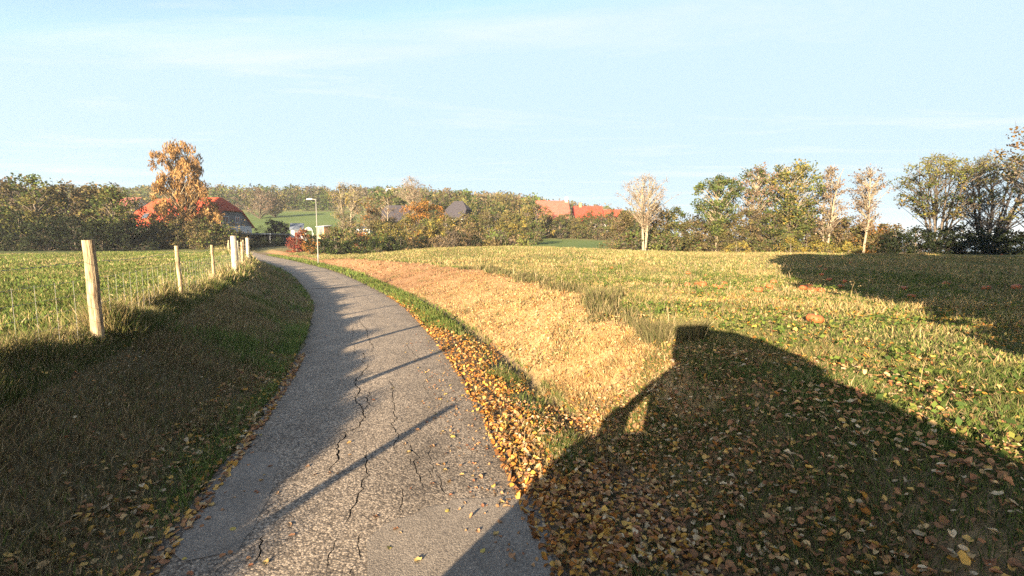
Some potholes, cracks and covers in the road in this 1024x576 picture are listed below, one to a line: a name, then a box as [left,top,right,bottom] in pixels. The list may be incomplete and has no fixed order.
crack [326,319,374,576]
crack [389,381,446,513]
